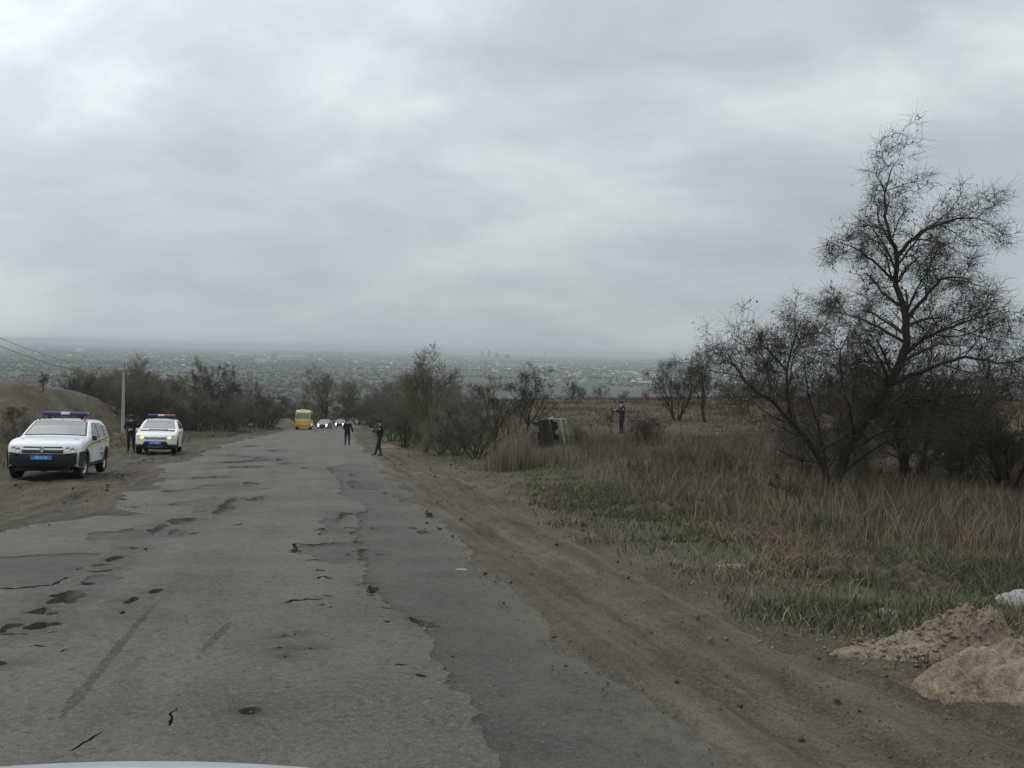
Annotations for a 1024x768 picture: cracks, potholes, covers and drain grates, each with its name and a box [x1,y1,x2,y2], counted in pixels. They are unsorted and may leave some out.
pothole [45,590,88,604]
pothole [145,523,168,538]
crack [0,575,77,589]
crack [168,708,177,726]
pothole [238,707,262,715]
pothole [212,497,239,514]
pothole [408,617,440,628]
pothole [0,623,25,633]
pothole [22,622,63,630]
crack [284,527,384,608]
crack [72,731,103,750]
